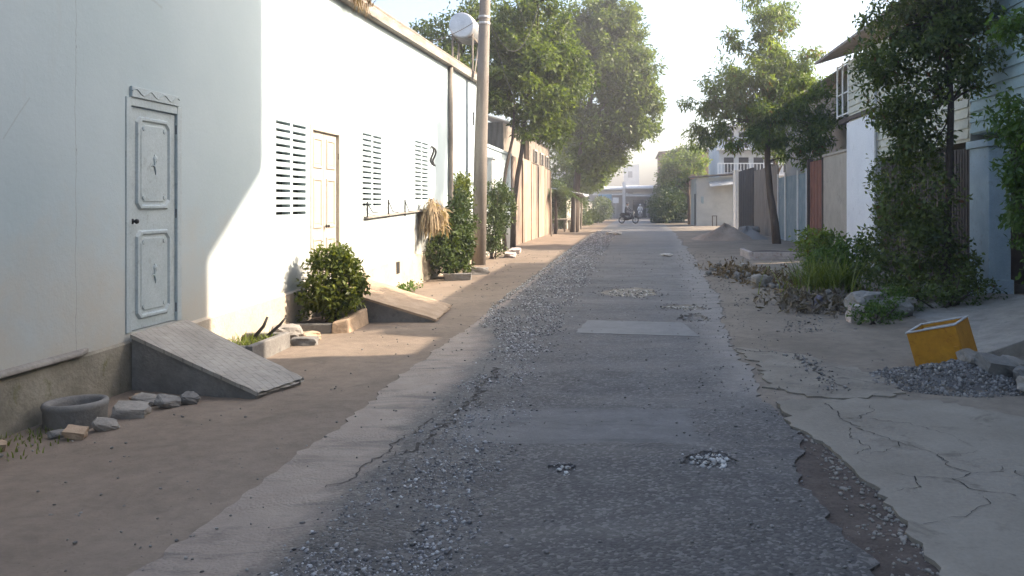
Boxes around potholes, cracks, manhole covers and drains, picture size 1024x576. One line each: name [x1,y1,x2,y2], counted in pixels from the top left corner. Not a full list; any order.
crack [325,367,501,487]
crack [736,348,1021,524]
pothole [677,312,711,322]
pothole [595,287,663,300]
pothole [547,462,576,476]
pothole [679,448,740,470]
